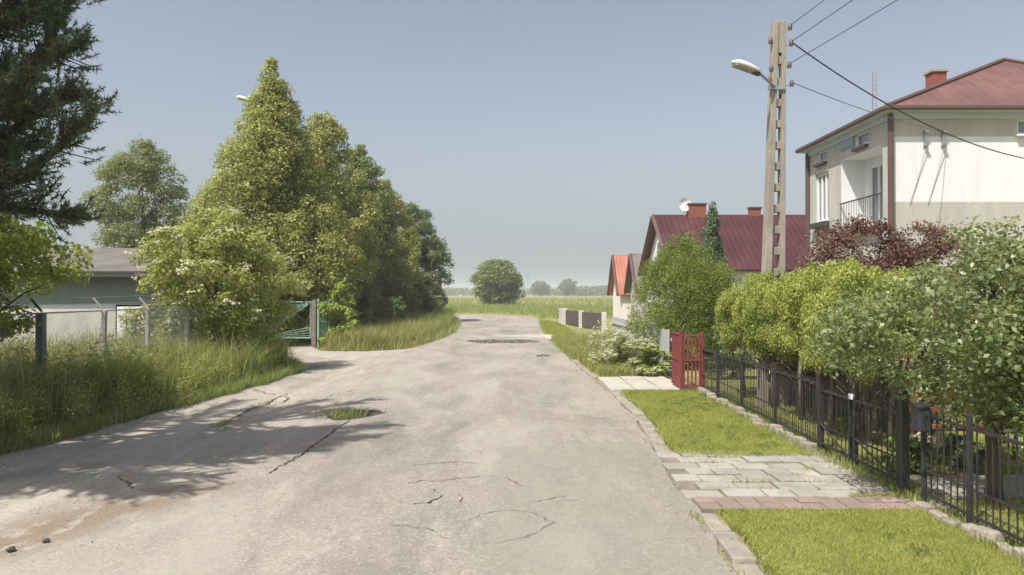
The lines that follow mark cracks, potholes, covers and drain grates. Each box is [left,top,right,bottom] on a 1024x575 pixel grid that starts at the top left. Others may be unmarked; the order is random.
crack [216,389,292,430]
crack [269,421,350,474]
pothole [328,409,386,420]
crack [390,525,450,539]
crack [408,461,572,544]
